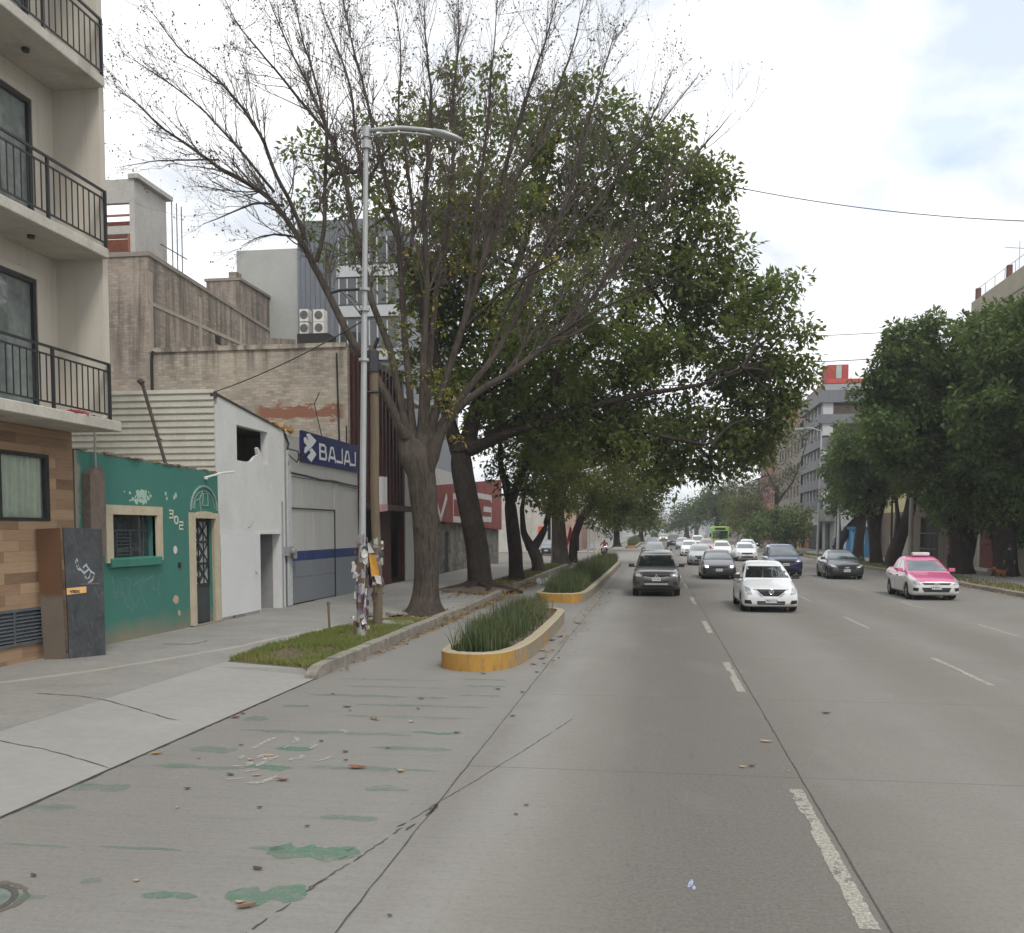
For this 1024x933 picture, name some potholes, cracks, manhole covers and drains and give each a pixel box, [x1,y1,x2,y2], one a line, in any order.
manhole cover [0,881,31,912]
crack [246,719,572,933]
crack [0,740,109,768]
crack [39,693,176,720]
